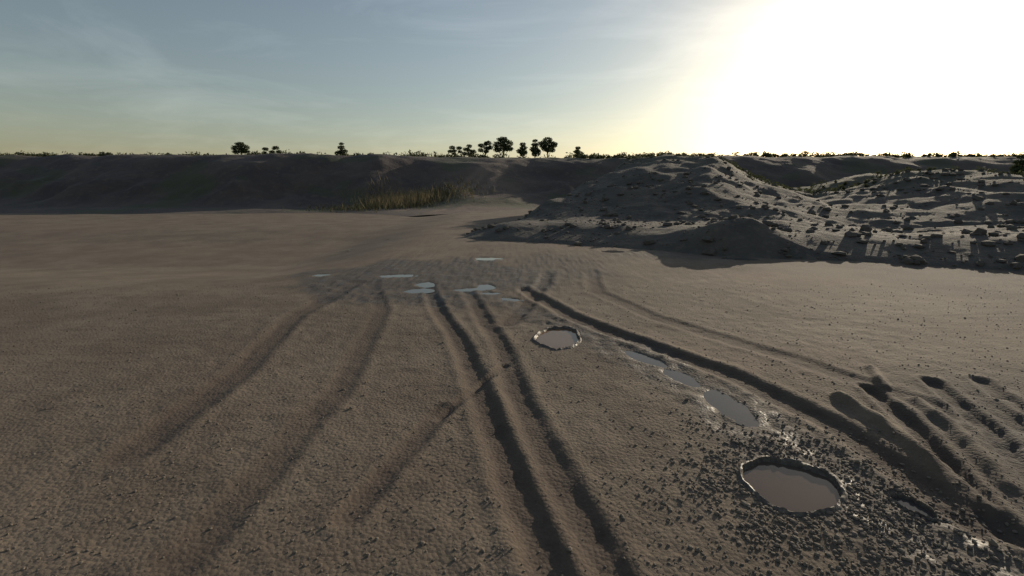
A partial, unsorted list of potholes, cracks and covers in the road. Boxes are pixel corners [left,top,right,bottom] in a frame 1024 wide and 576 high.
pothole [532,325,582,351]
pothole [887,492,940,523]
pothole [737,455,849,518]
